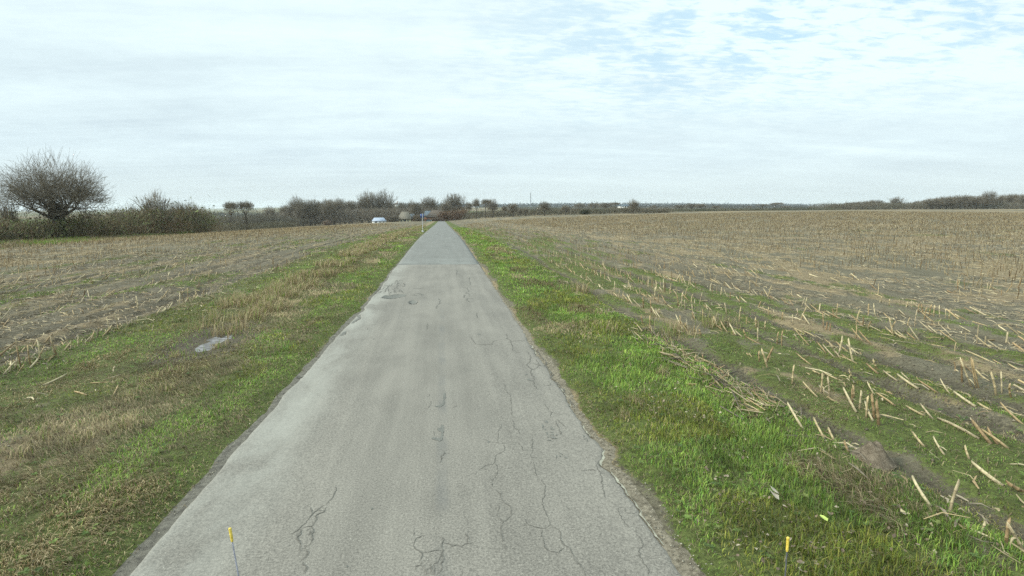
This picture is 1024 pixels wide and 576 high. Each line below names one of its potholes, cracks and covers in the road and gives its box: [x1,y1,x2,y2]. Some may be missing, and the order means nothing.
crack [413,531,472,573]
crack [476,389,585,574]
crack [591,462,650,573]
crack [291,486,337,572]
crack [475,334,575,434]
